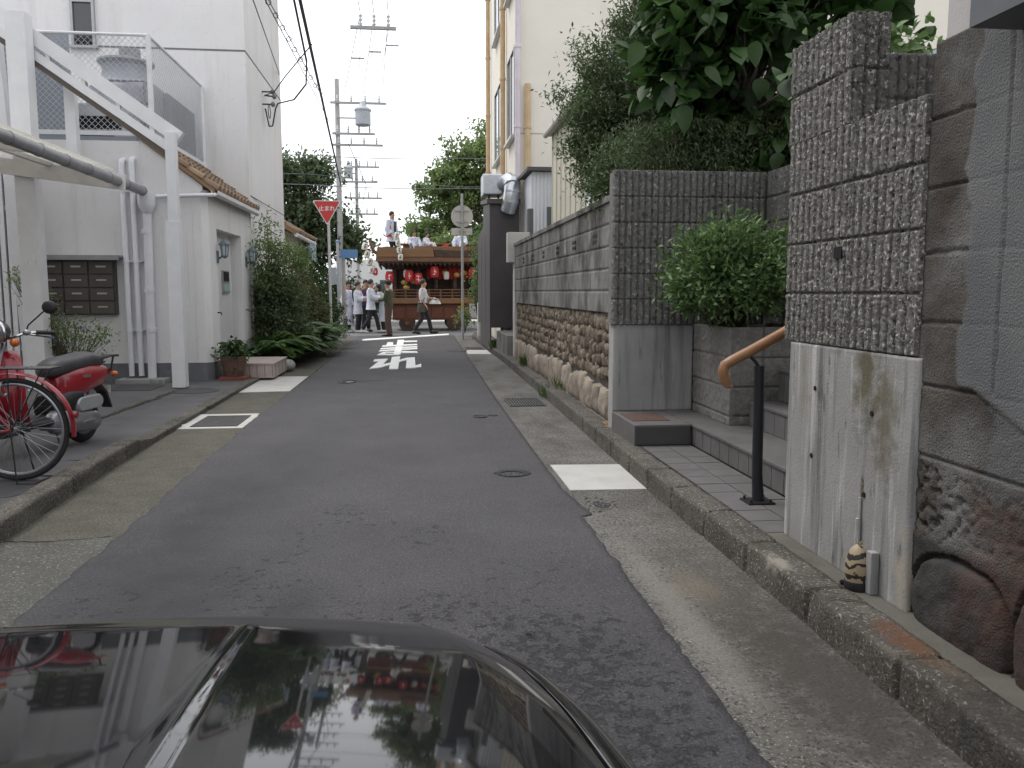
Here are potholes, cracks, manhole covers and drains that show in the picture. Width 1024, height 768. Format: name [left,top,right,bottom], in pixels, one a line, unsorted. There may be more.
drain grate [504,398,547,407]
